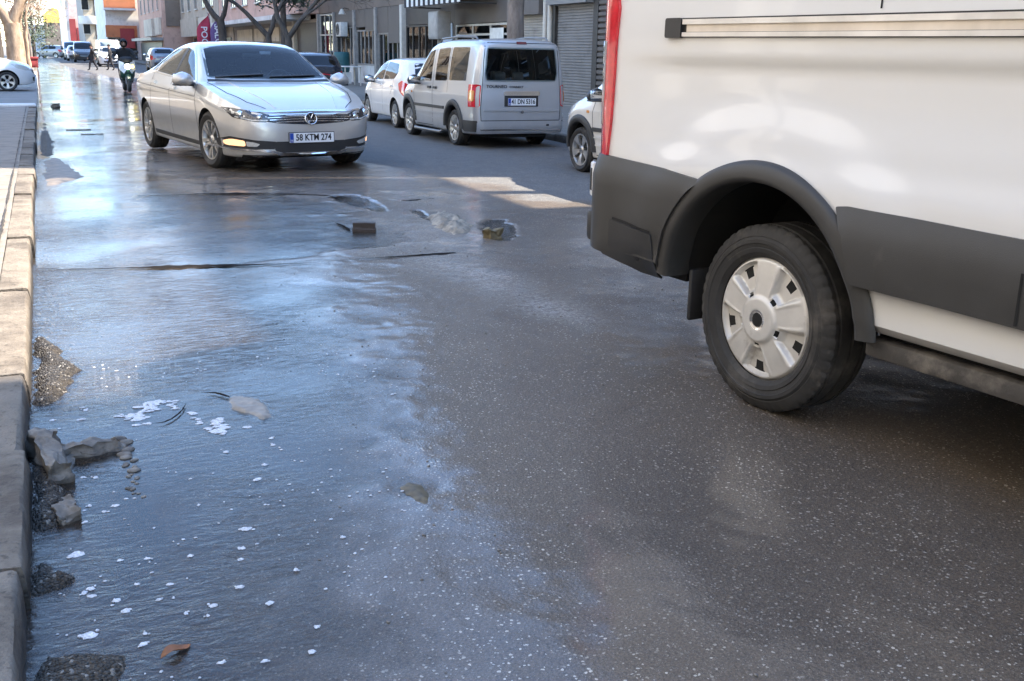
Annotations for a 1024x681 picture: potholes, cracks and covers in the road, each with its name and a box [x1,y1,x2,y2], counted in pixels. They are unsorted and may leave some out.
pothole [481,220,517,241]
pothole [331,196,384,212]
pothole [75,462,166,540]
